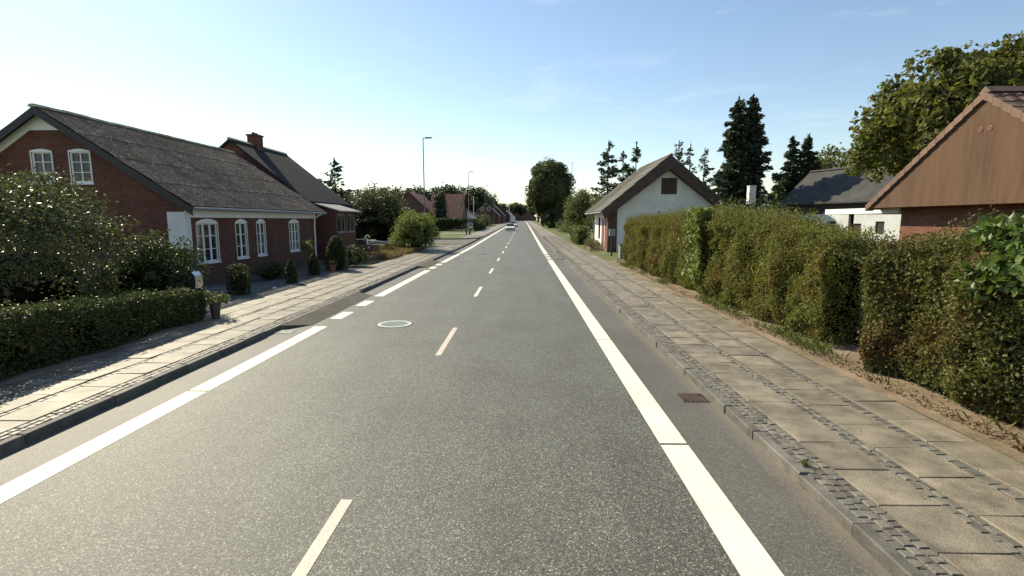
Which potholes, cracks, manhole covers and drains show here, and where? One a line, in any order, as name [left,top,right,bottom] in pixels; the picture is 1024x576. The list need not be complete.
manhole cover [376,320,413,328]
drain grate [676,393,710,402]
